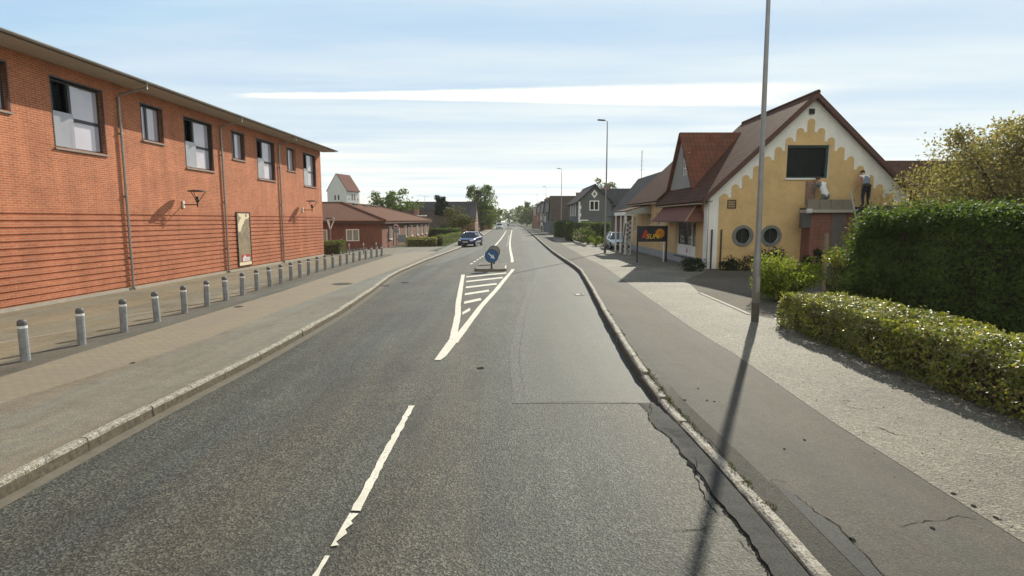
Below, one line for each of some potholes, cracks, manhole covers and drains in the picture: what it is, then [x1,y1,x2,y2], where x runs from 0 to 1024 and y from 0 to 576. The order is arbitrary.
crack [645,404,785,576]
